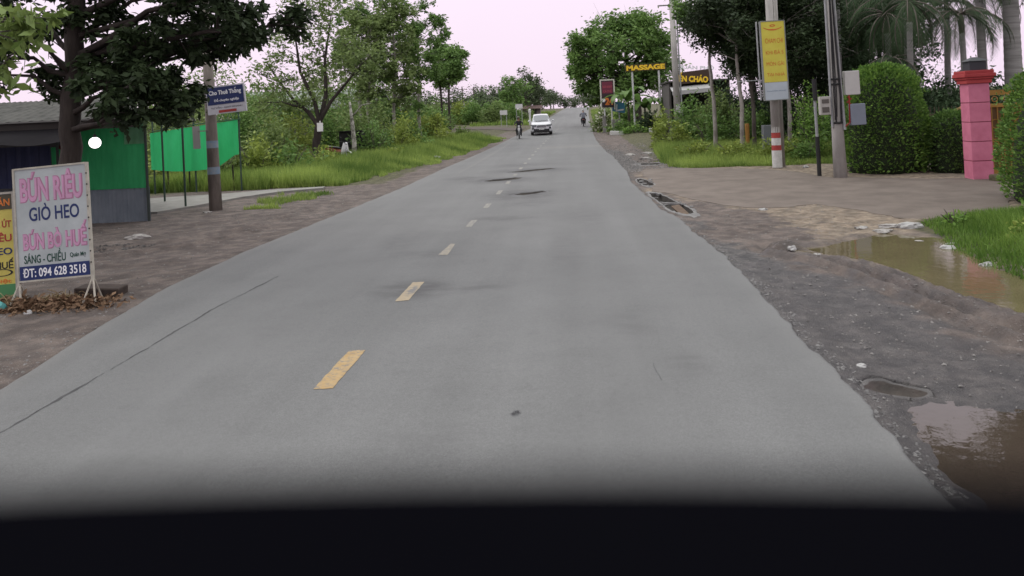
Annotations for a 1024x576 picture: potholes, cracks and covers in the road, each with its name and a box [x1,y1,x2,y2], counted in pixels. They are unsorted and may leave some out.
pothole [860,378,934,401]
crack [0,276,278,433]
